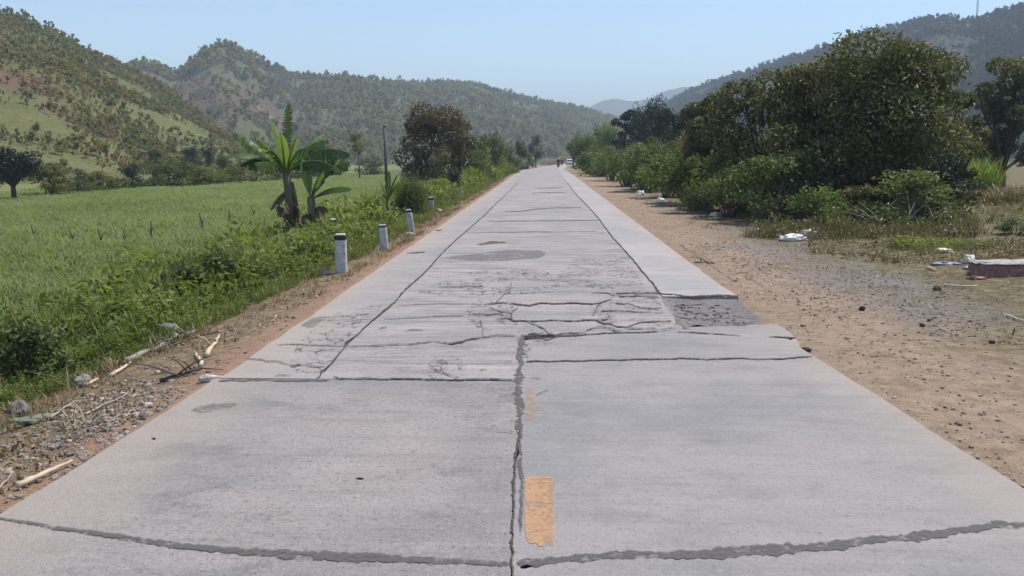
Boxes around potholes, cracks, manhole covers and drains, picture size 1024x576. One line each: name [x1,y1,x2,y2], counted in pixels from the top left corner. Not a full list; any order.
crack [243,182,753,379]
